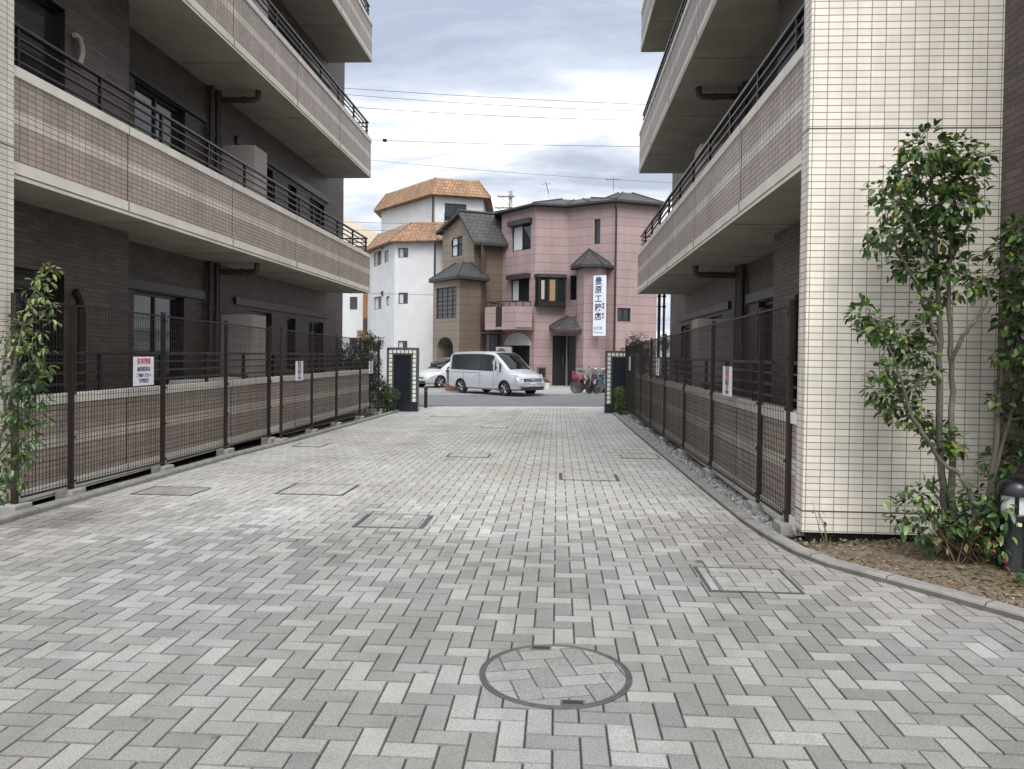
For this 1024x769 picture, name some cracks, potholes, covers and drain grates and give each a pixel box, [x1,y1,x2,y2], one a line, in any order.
manhole cover [479,644,632,711]
utility cover [559,473,620,481]
utility cover [694,566,805,595]
utility cover [129,486,212,496]
utility cover [352,514,434,529]
utility cover [274,483,359,496]
